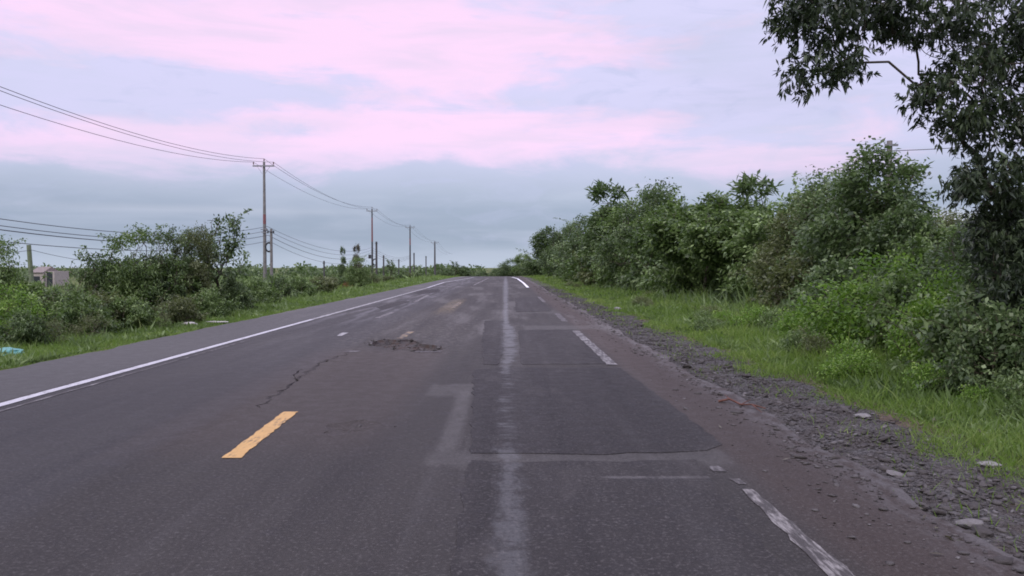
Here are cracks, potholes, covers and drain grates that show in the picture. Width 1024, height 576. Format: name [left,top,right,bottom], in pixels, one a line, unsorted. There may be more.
pothole [363,338,450,353]
crack [256,353,348,408]
